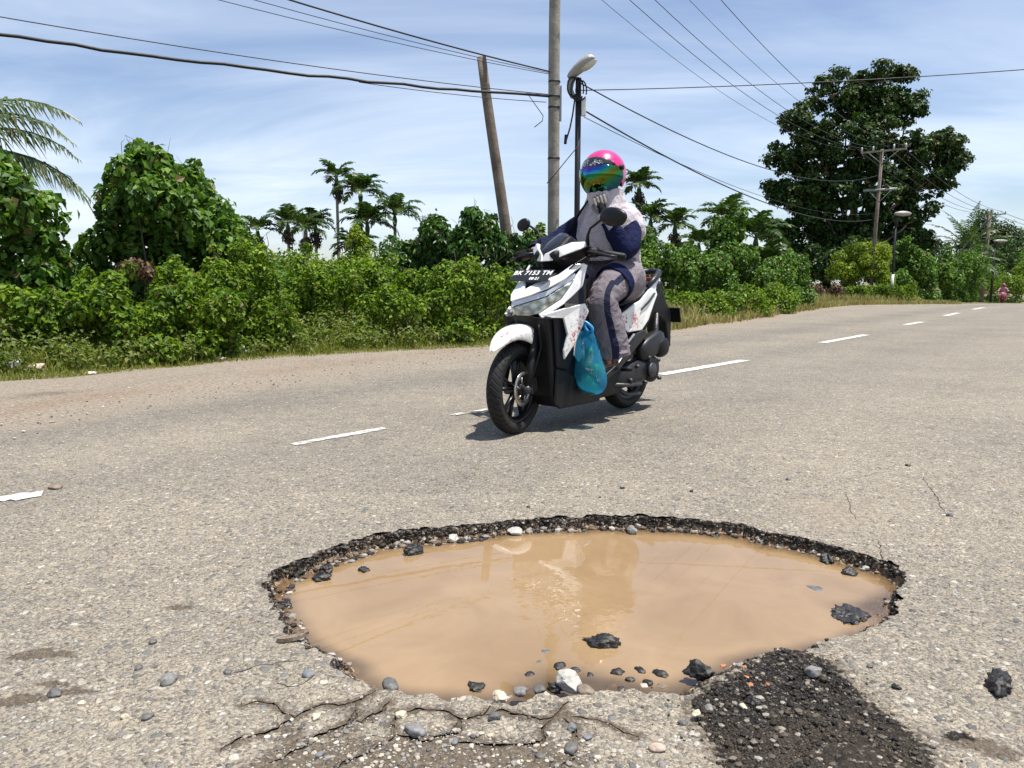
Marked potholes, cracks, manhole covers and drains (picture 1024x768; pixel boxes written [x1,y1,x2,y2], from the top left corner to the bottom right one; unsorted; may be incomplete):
crack [208,695,626,768]
pothole [261,515,907,723]
